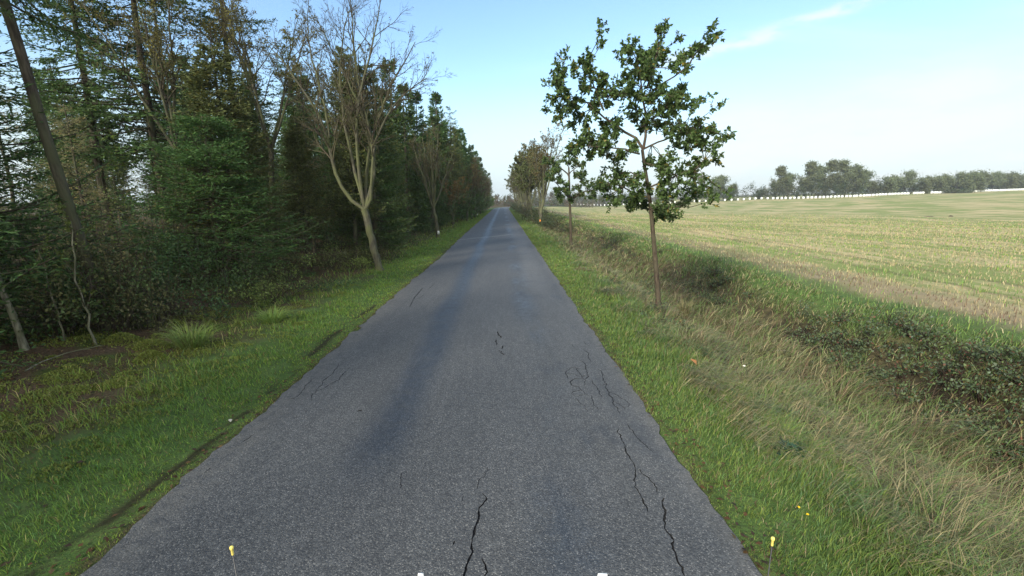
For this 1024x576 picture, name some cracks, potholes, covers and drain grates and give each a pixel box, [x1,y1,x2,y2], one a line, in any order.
crack [565,343,685,576]
crack [291,364,350,400]
crack [453,468,493,576]
